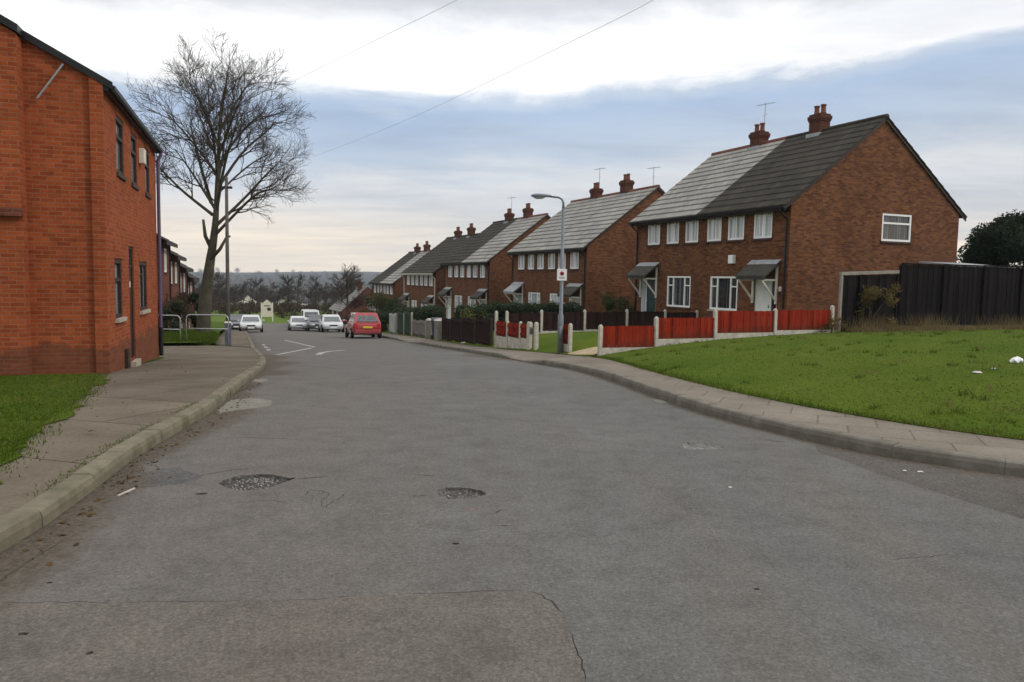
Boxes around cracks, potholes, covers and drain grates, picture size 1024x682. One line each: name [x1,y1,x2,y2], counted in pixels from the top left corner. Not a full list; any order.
pothole [437,487,486,499]
crack [569,631,586,682]
crack [295,476,345,507]
pothole [219,474,295,491]
